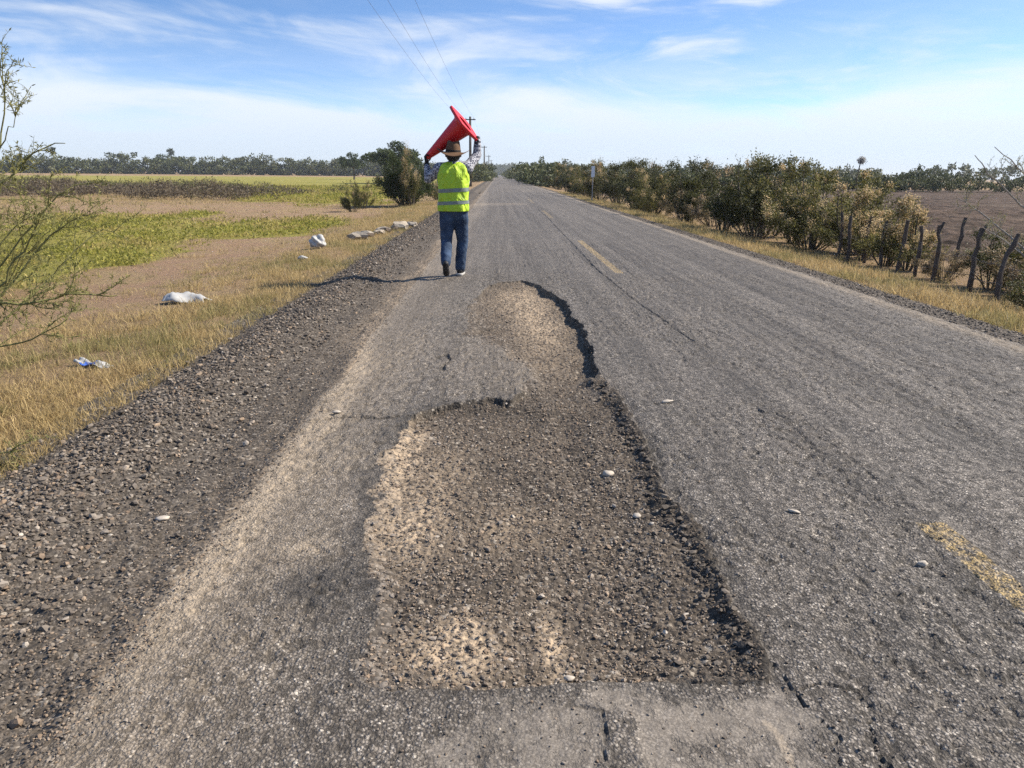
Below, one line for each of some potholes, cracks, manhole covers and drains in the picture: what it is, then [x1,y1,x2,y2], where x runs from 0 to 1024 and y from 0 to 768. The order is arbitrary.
pothole [310,280,771,692]
